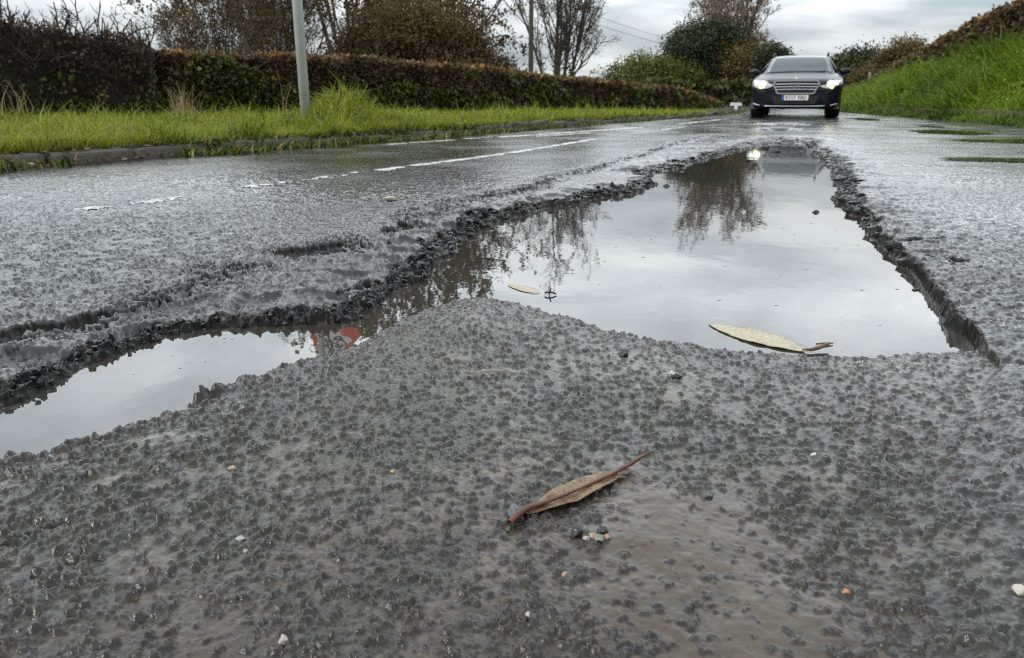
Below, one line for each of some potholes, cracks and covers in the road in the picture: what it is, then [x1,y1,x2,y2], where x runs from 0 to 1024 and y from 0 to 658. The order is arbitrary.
pothole [0,136,991,482]
